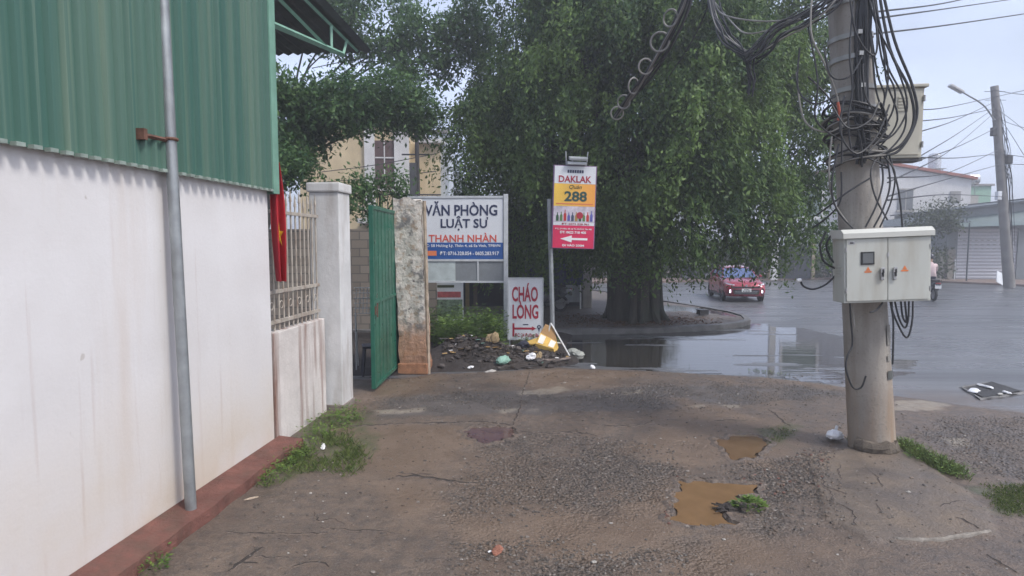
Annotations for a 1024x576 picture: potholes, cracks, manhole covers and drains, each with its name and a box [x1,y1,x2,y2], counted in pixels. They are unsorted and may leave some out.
crack [986,554,1016,572]
crack [816,447,884,525]
pothole [658,475,767,531]
pothole [706,432,777,462]
crack [396,472,479,485]
crack [940,500,978,528]
crack [225,512,401,572]
crack [714,409,791,426]
